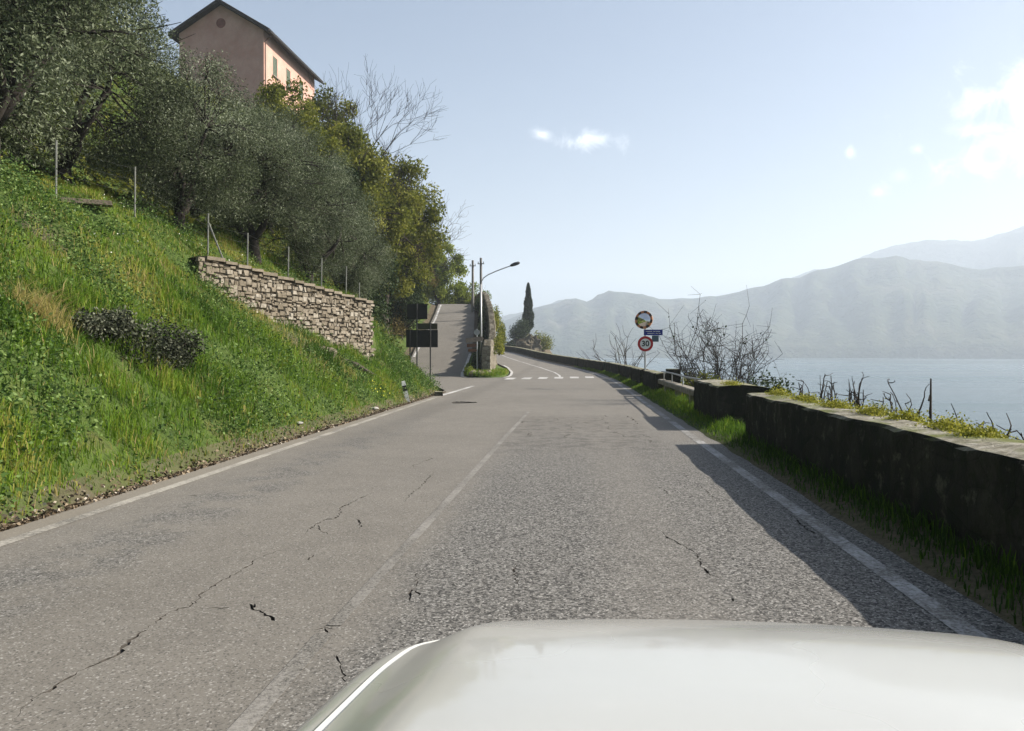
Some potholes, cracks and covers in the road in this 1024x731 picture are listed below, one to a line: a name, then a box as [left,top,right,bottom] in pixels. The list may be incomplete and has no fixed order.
crack [661,531,717,577]
crack [305,495,367,535]
crack [12,549,299,720]
